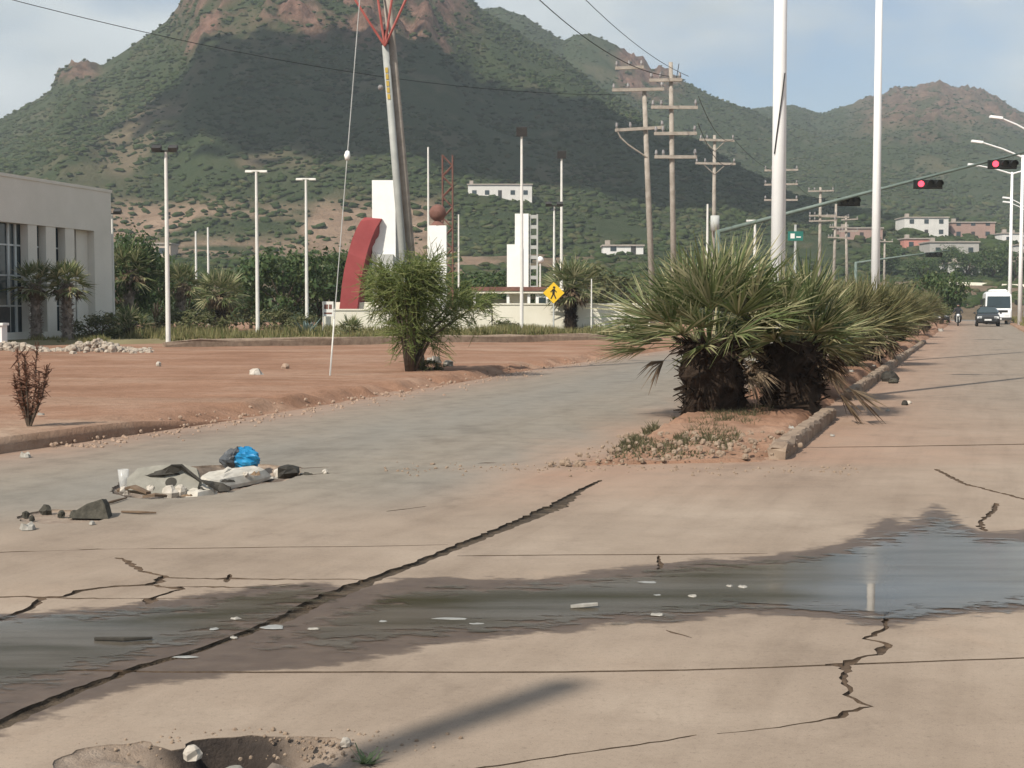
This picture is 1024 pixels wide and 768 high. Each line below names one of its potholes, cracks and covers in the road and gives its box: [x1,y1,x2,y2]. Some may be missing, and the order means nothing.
crack [0,558,363,621]
crack [934,469,1024,531]
crack [477,612,893,768]
pothole [52,735,378,768]
